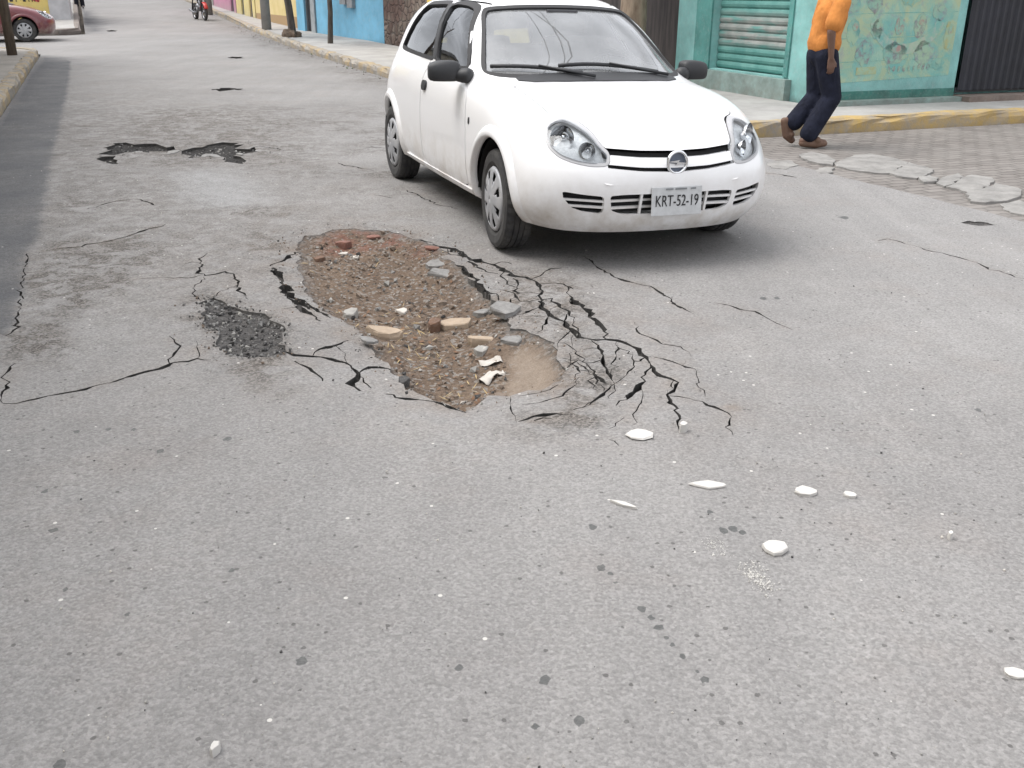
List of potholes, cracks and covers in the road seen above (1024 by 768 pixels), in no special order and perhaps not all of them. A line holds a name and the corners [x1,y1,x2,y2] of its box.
pothole [100,142,175,155]
crack [47,225,164,251]
pothole [181,142,259,164]
pothole [295,229,566,413]
crack [878,239,1017,278]
crack [286,239,733,445]
pothole [97,156,118,164]
crack [141,255,247,301]
crack [270,252,331,321]
crack [0,253,203,404]
